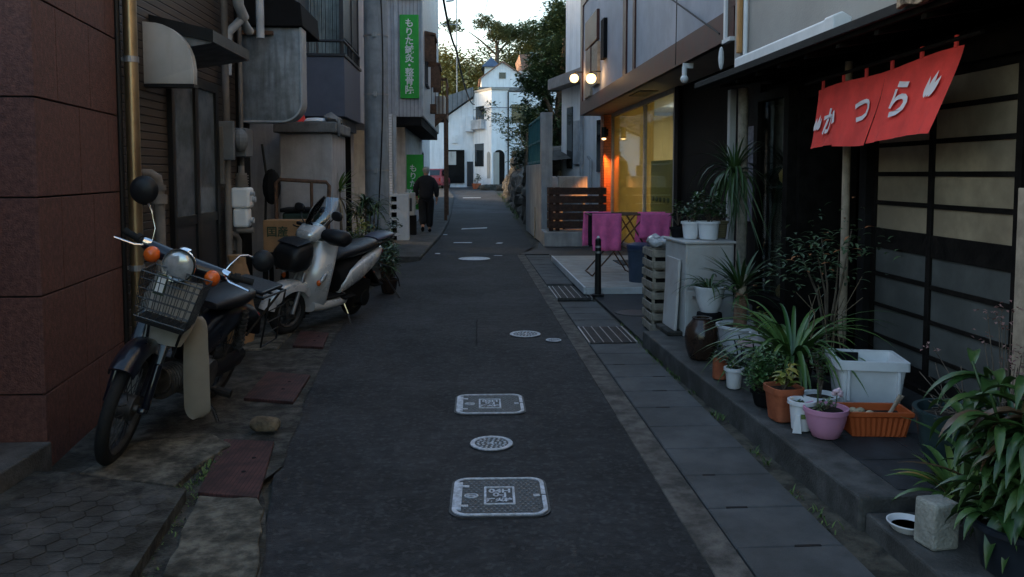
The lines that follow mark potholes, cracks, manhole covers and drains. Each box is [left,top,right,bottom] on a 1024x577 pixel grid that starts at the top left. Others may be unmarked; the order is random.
drain grate [577,326,638,346]
manhole cover [469,436,514,452]
manhole cover [454,394,526,416]
drain grate [548,286,593,301]
manhole cover [449,477,551,519]
